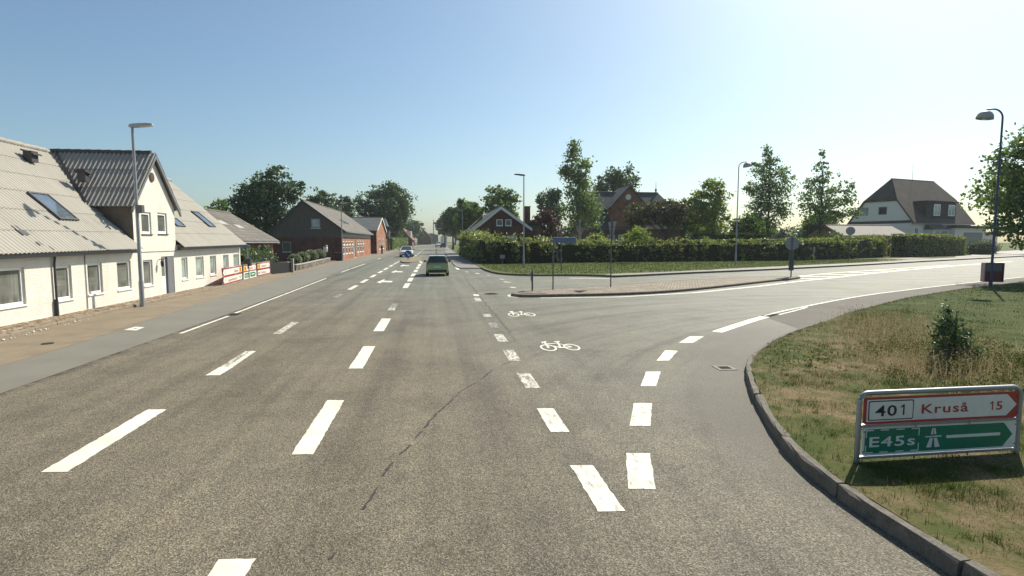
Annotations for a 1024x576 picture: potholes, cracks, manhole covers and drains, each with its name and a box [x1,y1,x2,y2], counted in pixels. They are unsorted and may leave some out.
crack [328,358,516,559]
